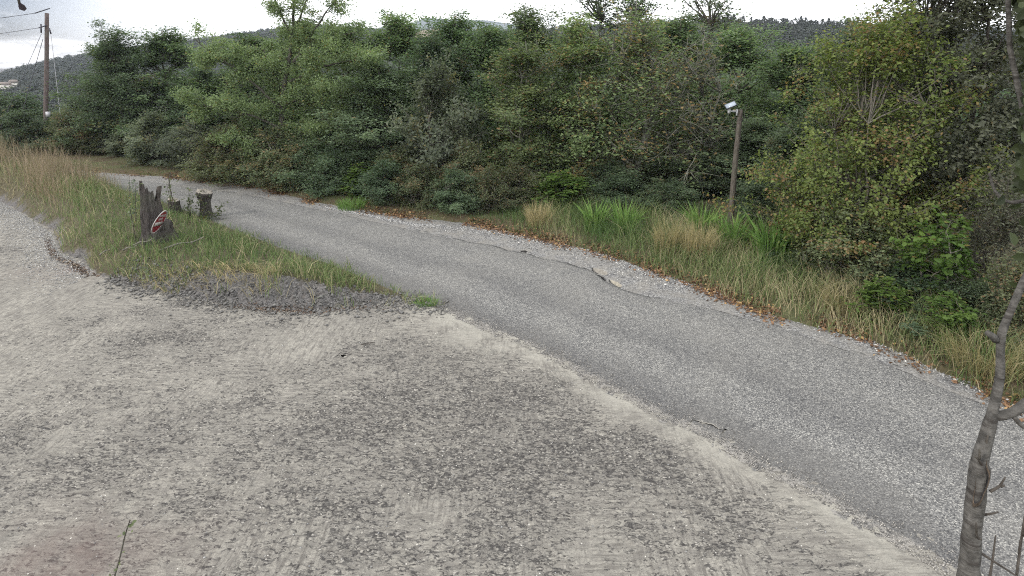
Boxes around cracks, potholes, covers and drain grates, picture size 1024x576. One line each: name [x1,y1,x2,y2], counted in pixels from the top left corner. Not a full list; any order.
crack [691,413,728,437]
crack [460,239,649,297]
